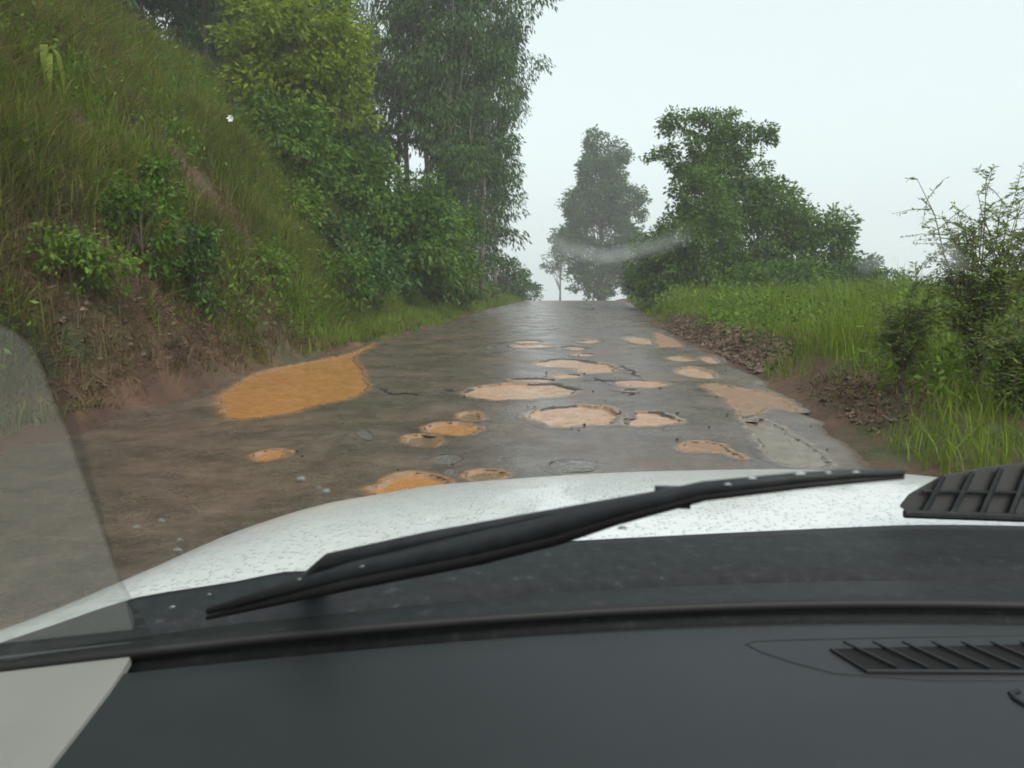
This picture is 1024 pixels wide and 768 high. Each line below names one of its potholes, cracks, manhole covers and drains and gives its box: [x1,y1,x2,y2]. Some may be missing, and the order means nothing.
pothole [455,467,518,482]
pothole [451,382,594,402]
pothole [200,343,384,422]
pothole [650,333,689,349]
pothole [515,400,637,431]
pothole [612,410,710,428]
pothole [619,336,661,345]
pothole [240,447,304,464]
crack [378,387,464,395]
pothole [351,468,464,497]
pothole [394,432,452,449]
pothole [605,379,678,389]
